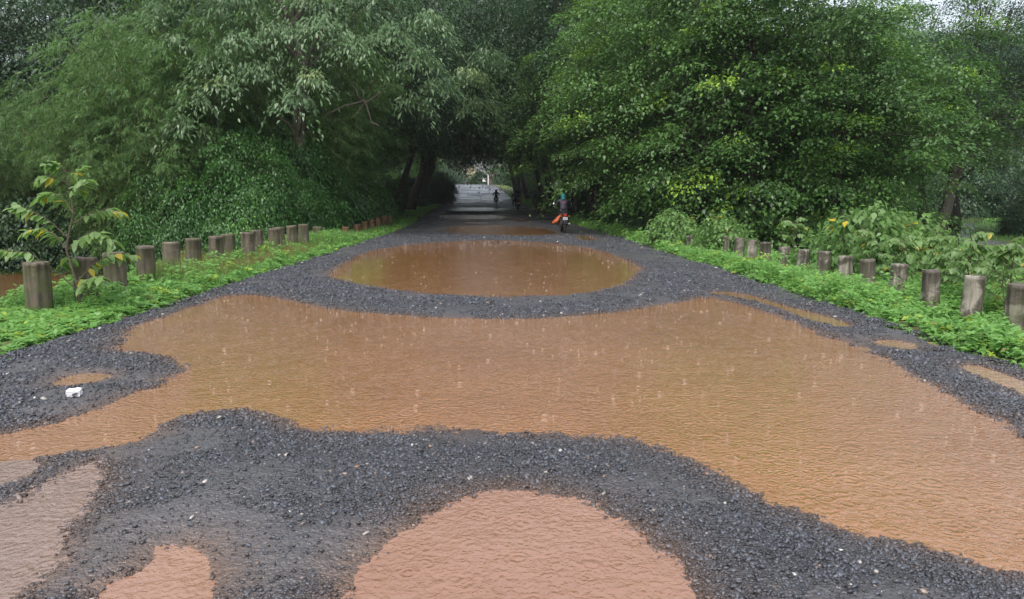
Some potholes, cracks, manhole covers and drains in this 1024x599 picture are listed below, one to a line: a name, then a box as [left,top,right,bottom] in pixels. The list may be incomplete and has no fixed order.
pothole [0,294,1024,580]
pothole [322,240,648,297]
pothole [442,225,562,236]
pothole [77,539,233,599]
pothole [320,478,721,599]
